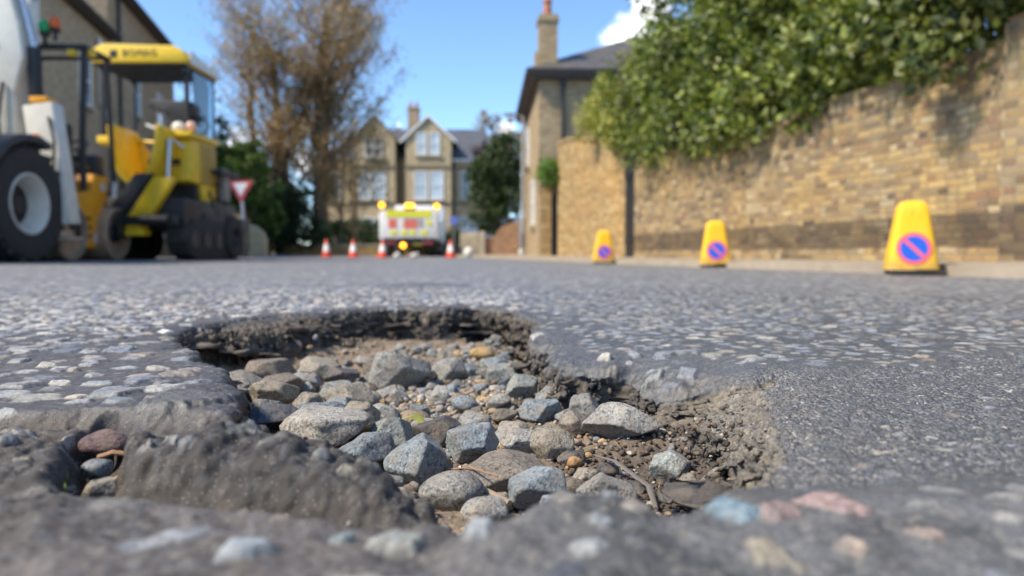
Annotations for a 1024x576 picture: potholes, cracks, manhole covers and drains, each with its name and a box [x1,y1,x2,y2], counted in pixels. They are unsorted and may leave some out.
pothole [178,308,794,535]
